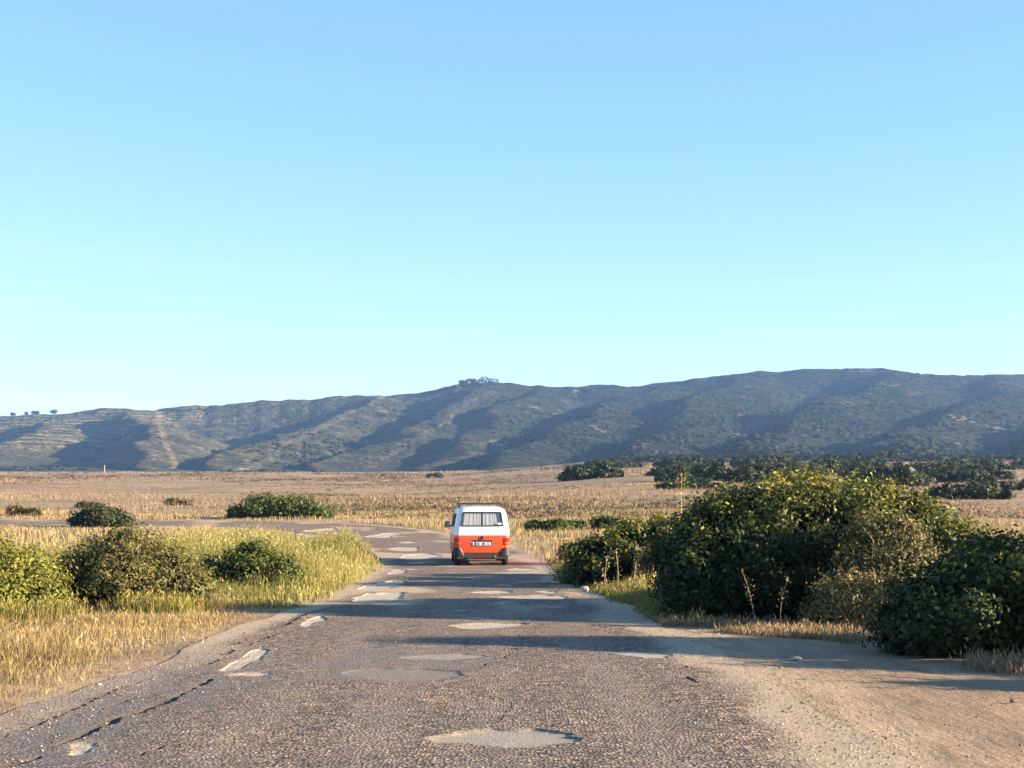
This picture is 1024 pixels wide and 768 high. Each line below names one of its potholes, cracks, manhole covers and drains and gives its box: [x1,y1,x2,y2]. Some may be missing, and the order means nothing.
pothole [219,648,270,671]
pothole [424,728,584,748]
